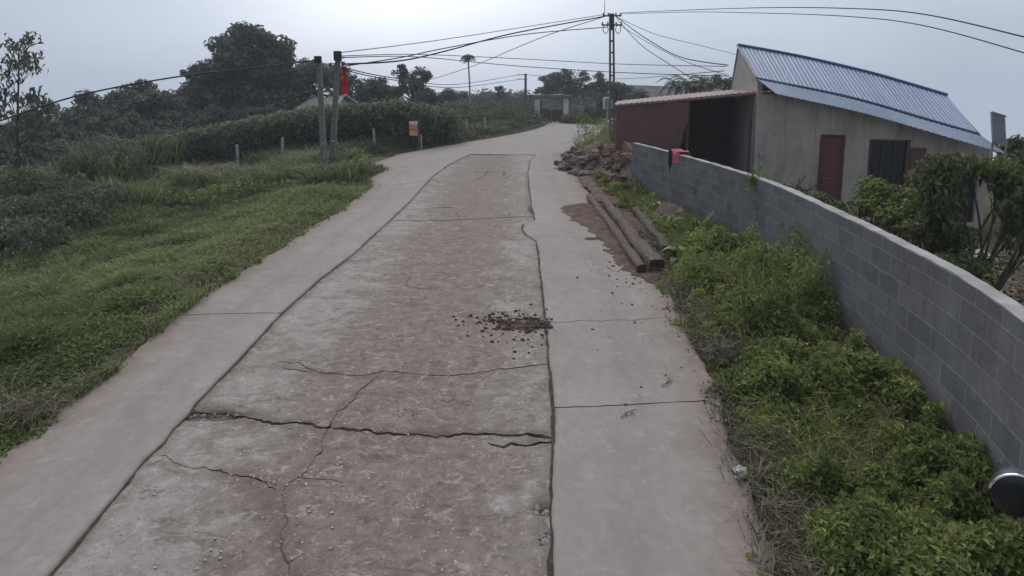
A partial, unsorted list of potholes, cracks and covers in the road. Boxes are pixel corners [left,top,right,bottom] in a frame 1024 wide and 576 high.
crack [156,362,551,568]
